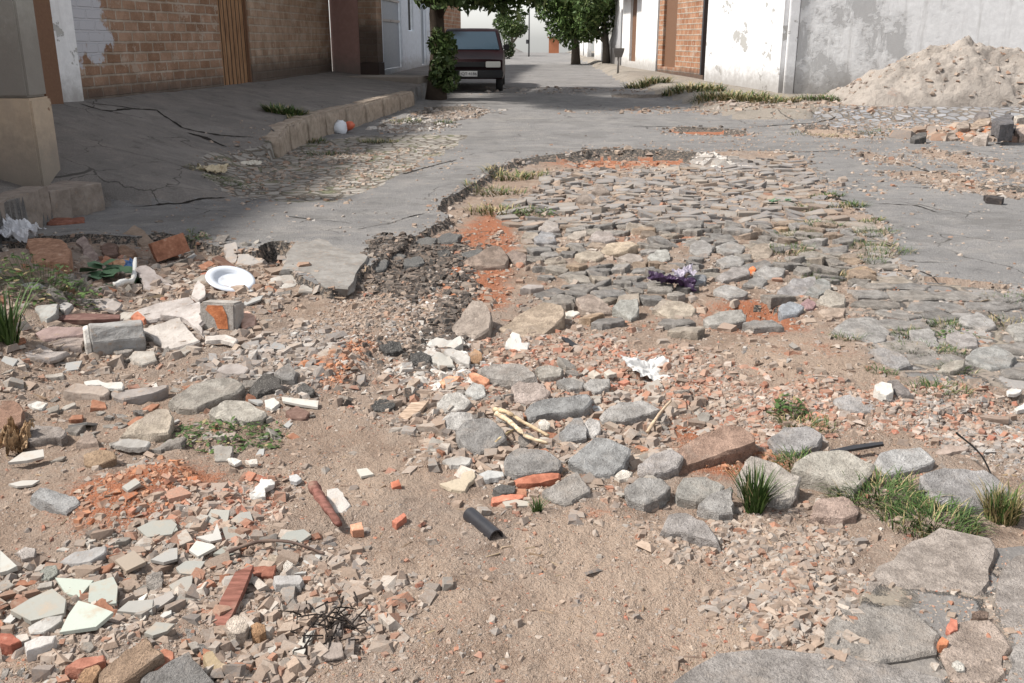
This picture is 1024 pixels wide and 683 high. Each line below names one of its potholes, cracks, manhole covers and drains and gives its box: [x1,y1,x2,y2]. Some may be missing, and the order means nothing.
pothole [258,240,290,267]
pothole [669,127,751,136]
pothole [199,134,468,202]
pothole [436,148,1024,415]
crack [131,197,226,207]
crack [79,102,246,147]
